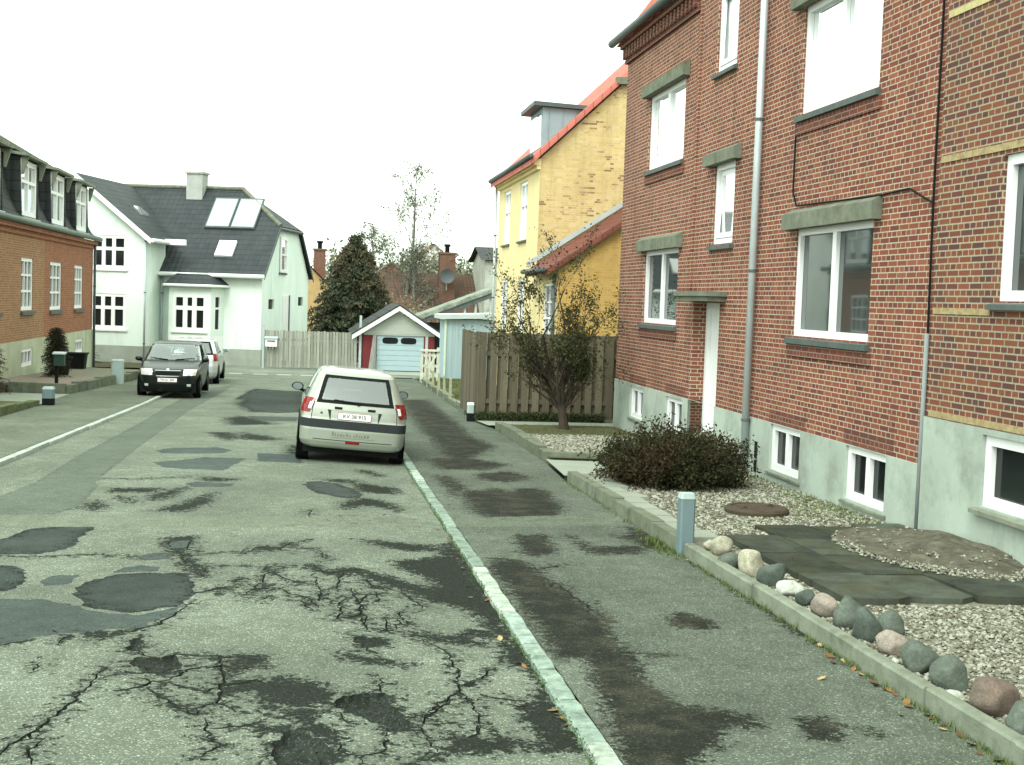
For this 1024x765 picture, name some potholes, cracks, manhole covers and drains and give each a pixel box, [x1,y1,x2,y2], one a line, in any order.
manhole cover [723,502,790,519]
crack [338,711,389,764]
crack [0,539,529,752]
